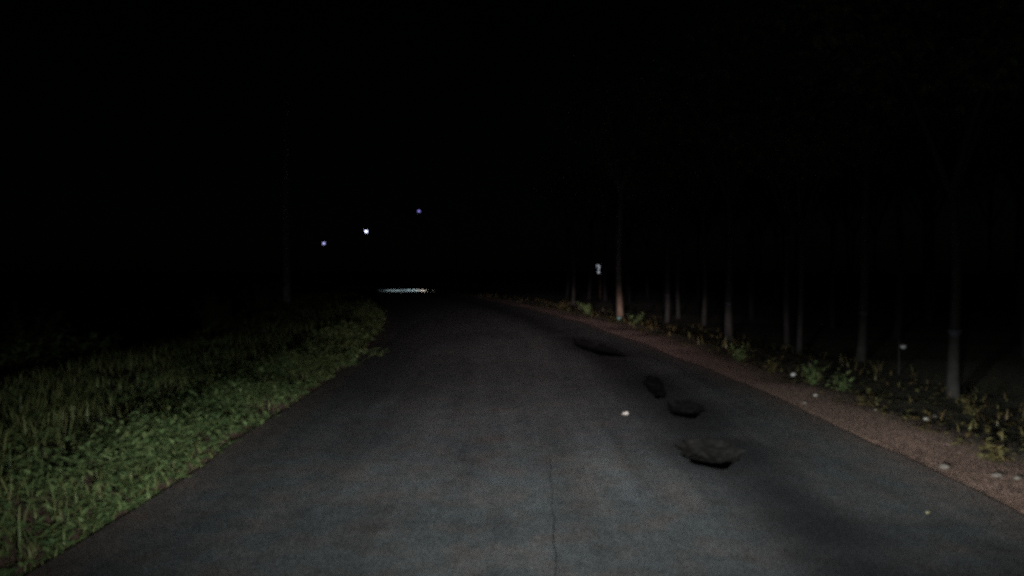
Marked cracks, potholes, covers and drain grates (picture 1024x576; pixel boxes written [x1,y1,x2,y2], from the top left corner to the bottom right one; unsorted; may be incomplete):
pothole [643,375,667,399]
pothole [572,338,627,357]
crack [549,457,557,576]
